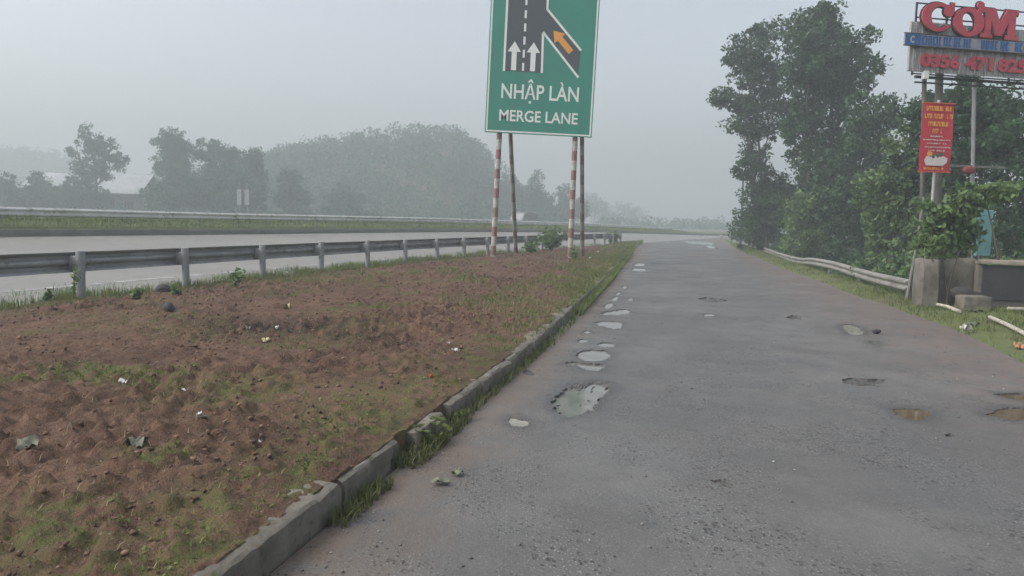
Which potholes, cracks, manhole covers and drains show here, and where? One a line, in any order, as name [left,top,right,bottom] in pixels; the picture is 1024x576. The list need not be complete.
pothole [986,407,1024,421]
pothole [595,321,623,329]
pothole [839,324,865,335]
pothole [550,381,610,418]
pothole [576,349,612,361]
pothole [892,408,931,420]
pothole [508,417,530,427]
pothole [842,377,885,386]
pothole [566,361,605,371]
